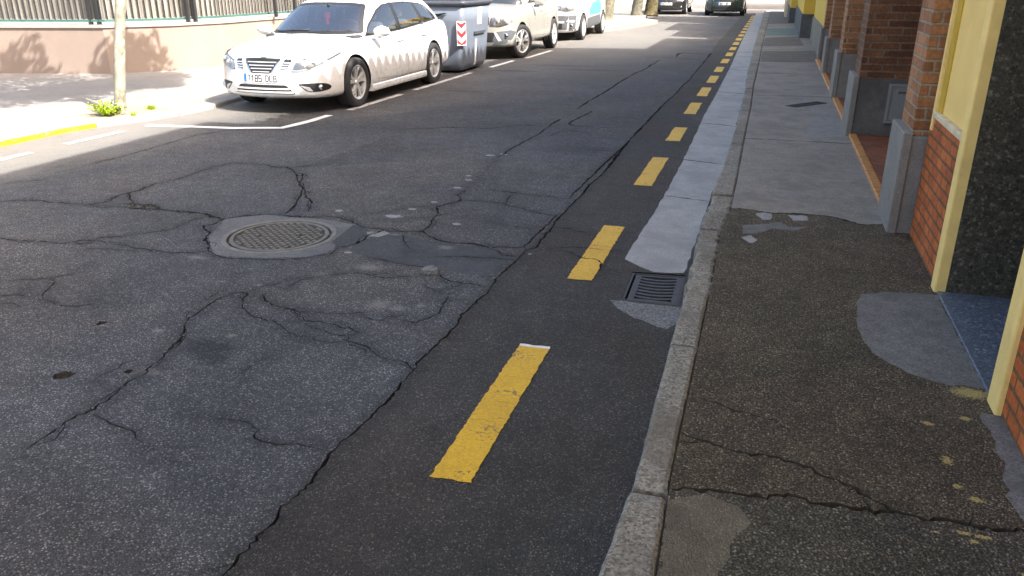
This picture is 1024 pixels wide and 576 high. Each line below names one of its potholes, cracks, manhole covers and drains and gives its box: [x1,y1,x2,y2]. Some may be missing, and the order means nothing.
crack [672,432,1024,532]
pothole [53,371,76,379]
crack [1,53,712,576]
drain grate [622,272,685,305]
manhole cover [220,219,337,254]
